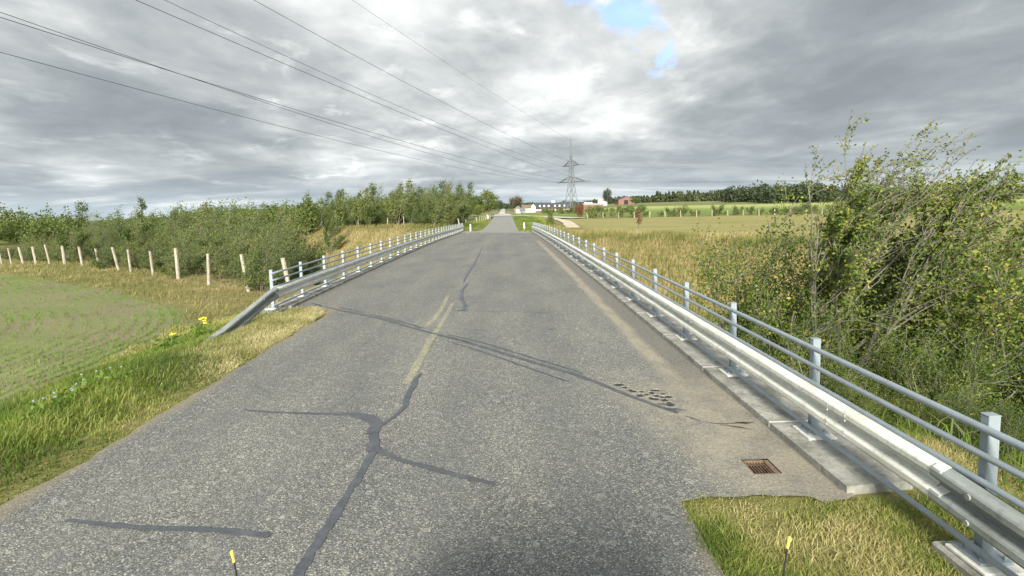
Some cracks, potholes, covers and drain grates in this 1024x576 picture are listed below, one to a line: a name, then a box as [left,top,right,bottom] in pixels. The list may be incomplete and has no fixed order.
pothole [614,384,674,406]
drain grate [741,460,780,474]
